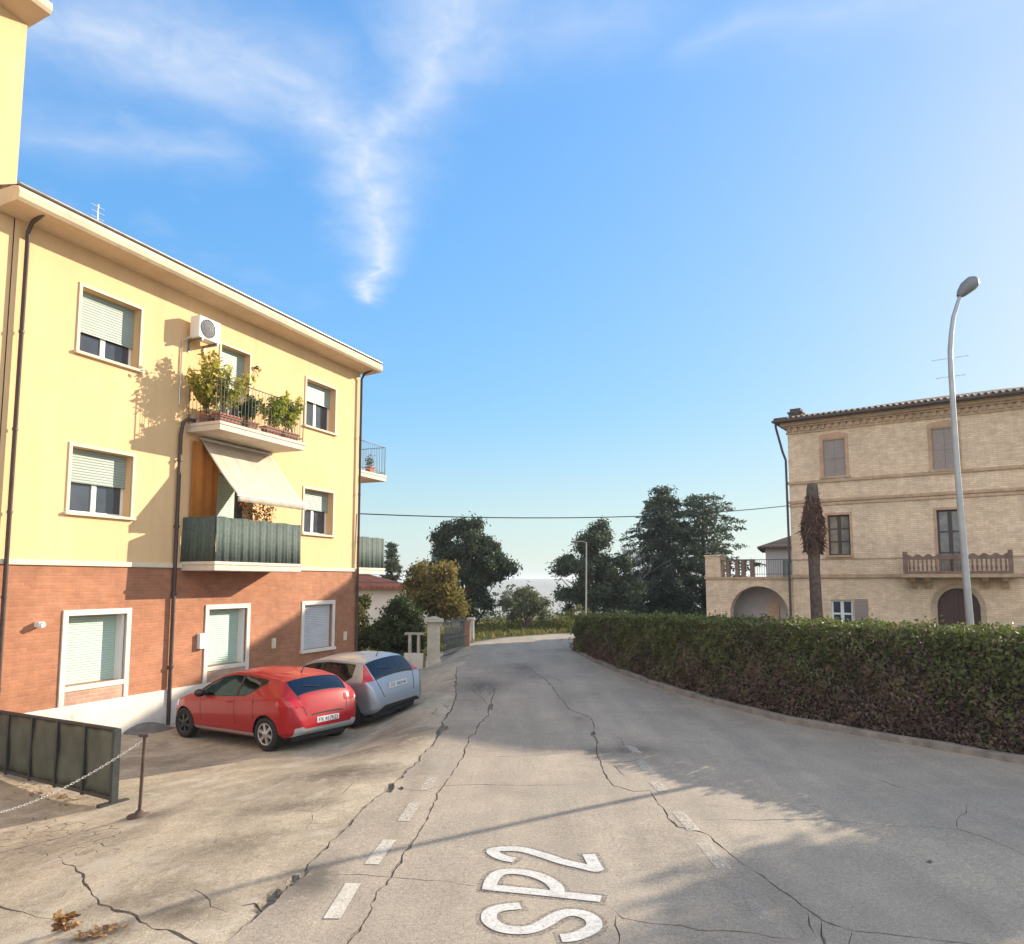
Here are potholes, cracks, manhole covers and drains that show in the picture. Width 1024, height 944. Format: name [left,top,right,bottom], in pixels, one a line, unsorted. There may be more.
crack [299,661,1024,944]
crack [0,817,198,944]
